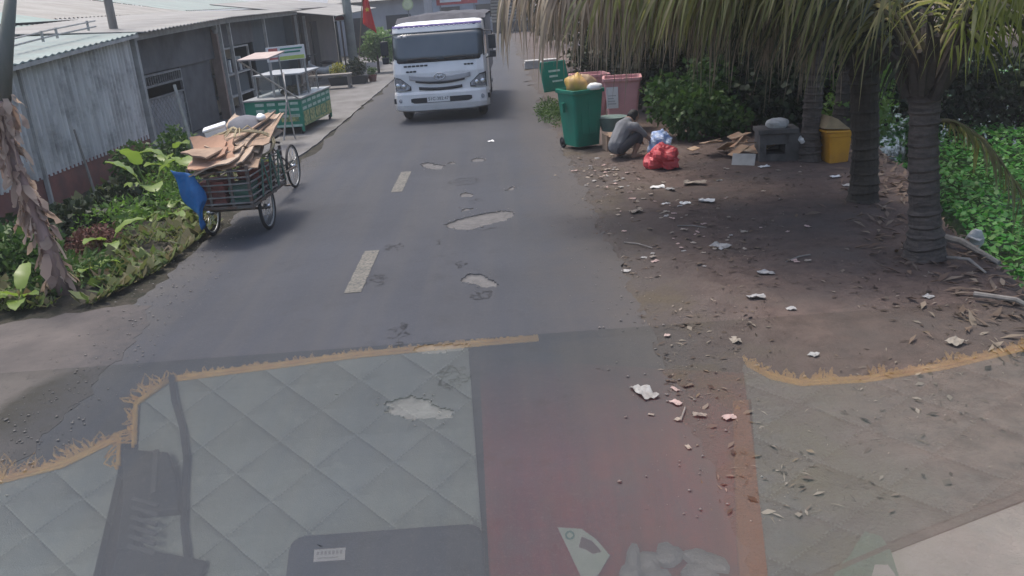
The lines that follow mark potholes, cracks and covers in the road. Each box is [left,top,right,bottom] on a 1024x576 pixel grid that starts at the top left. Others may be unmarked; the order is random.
crack [435,365,470,391]
pothole [384,395,454,421]
pothole [443,210,514,230]
pothole [461,274,499,288]
crack [387,322,408,347]
pothole [420,162,445,170]
